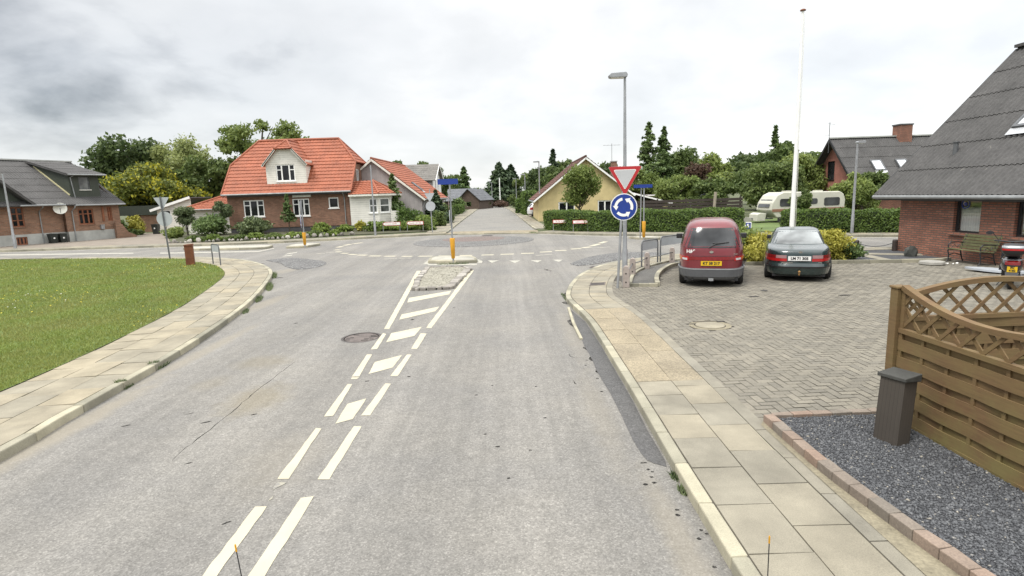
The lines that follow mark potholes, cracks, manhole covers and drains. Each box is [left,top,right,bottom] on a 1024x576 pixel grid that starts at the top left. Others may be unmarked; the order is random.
manhole cover [689,321,732,330]
crack [180,363,293,453]
manhole cover [341,332,381,343]
